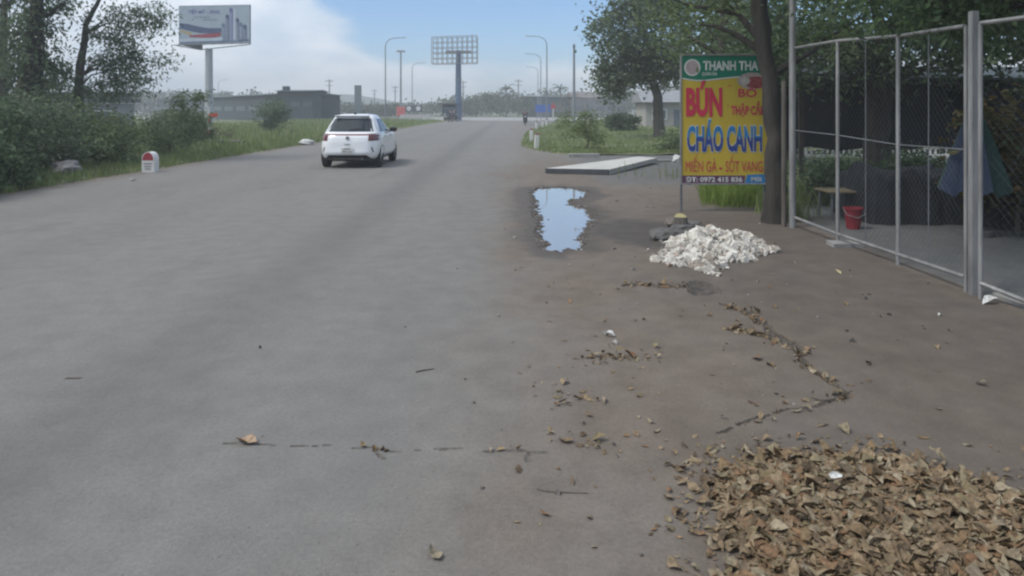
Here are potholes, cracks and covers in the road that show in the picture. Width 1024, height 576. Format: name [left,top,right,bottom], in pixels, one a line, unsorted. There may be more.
pothole [527,186,601,253]
crack [222,442,549,463]
crack [716,303,851,434]
